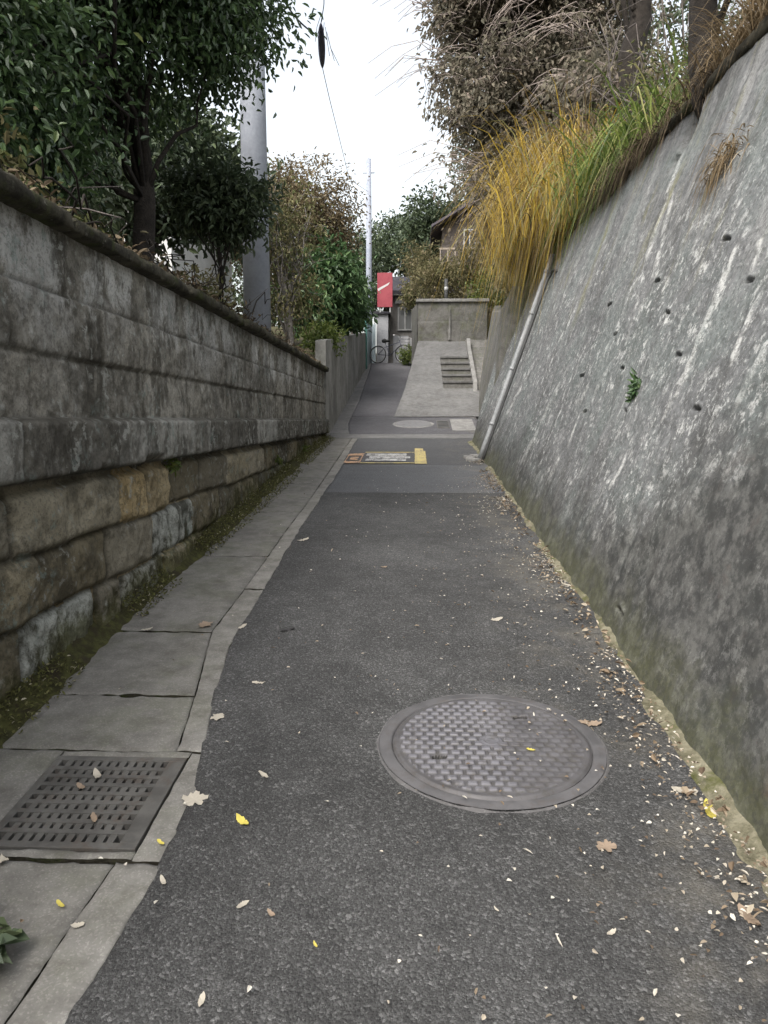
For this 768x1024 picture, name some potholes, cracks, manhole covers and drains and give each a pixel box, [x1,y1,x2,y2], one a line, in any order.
manhole cover [375,694,610,813]
manhole cover [393,420,434,428]
drain grate [0,756,187,852]
